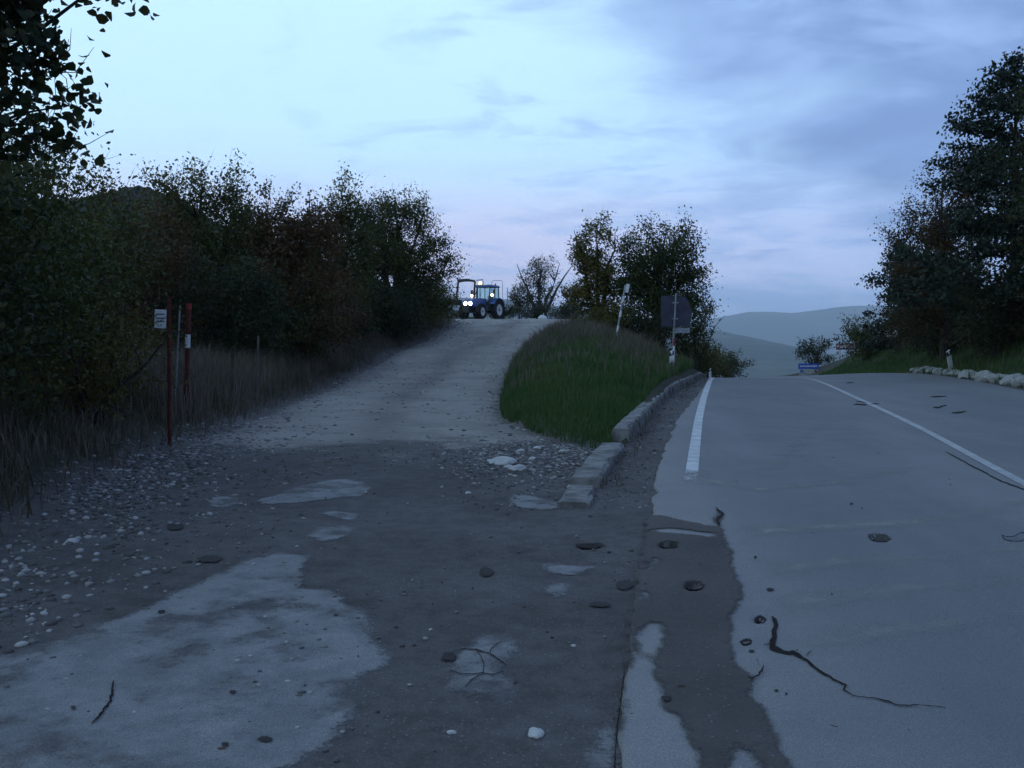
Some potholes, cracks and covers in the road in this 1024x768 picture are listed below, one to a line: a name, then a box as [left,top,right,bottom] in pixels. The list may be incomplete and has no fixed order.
pothole [616,579,633,590]
pothole [868,533,891,542]
crack [750,616,946,708]
crack [449,641,506,687]
pothole [575,542,604,550]
pothole [684,580,704,591]
crack [91,680,114,724]
